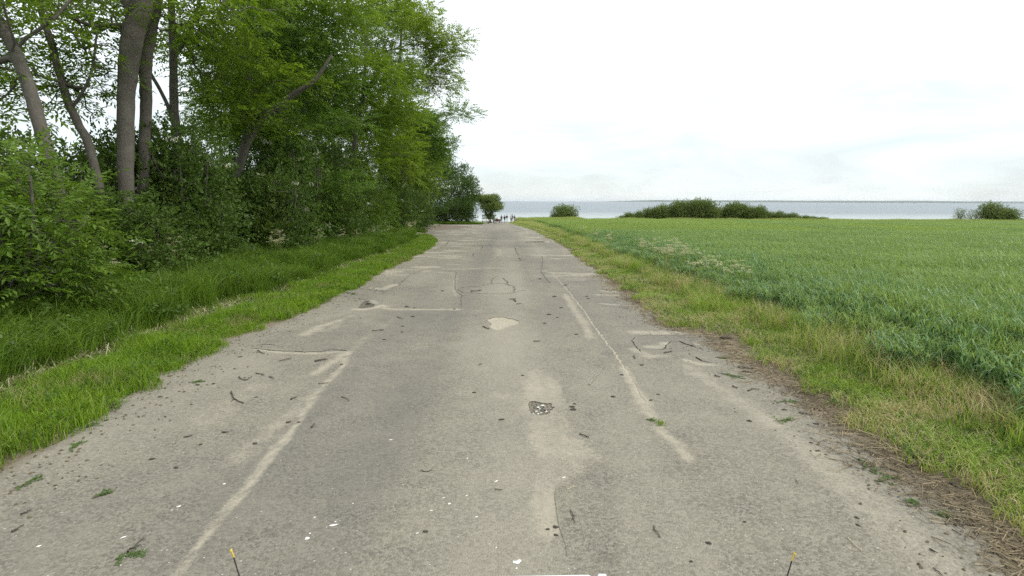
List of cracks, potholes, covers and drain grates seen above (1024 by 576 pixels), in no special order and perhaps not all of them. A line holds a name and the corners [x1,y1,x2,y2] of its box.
pothole [528,401,555,415]
crack [254,344,346,352]
crack [356,240,523,309]
crack [554,494,567,554]
